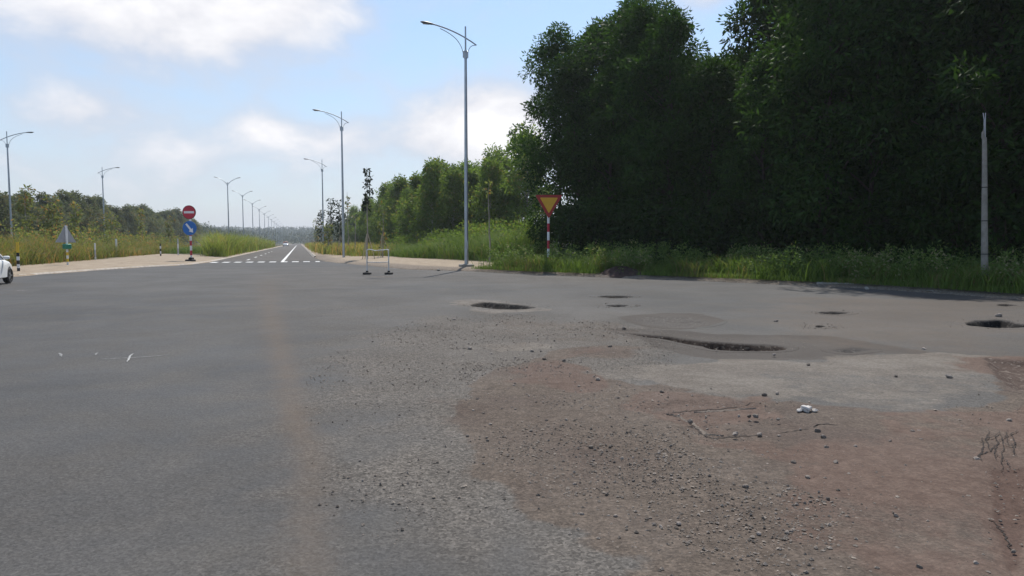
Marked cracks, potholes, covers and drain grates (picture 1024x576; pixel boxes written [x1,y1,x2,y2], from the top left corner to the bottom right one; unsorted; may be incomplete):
pothole [953,318,1024,329]
pothole [463,301,543,310]
pothole [610,331,799,353]
crack [973,430,1021,473]
